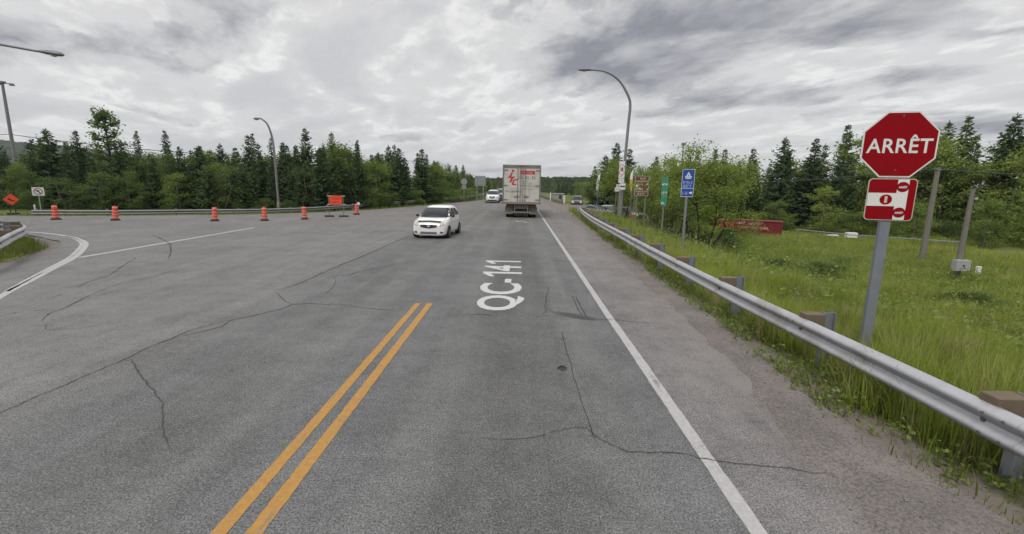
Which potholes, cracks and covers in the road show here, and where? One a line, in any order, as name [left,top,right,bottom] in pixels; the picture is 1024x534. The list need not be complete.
crack [6,235,192,330]
crack [488,286,829,474]
crack [0,261,438,450]
